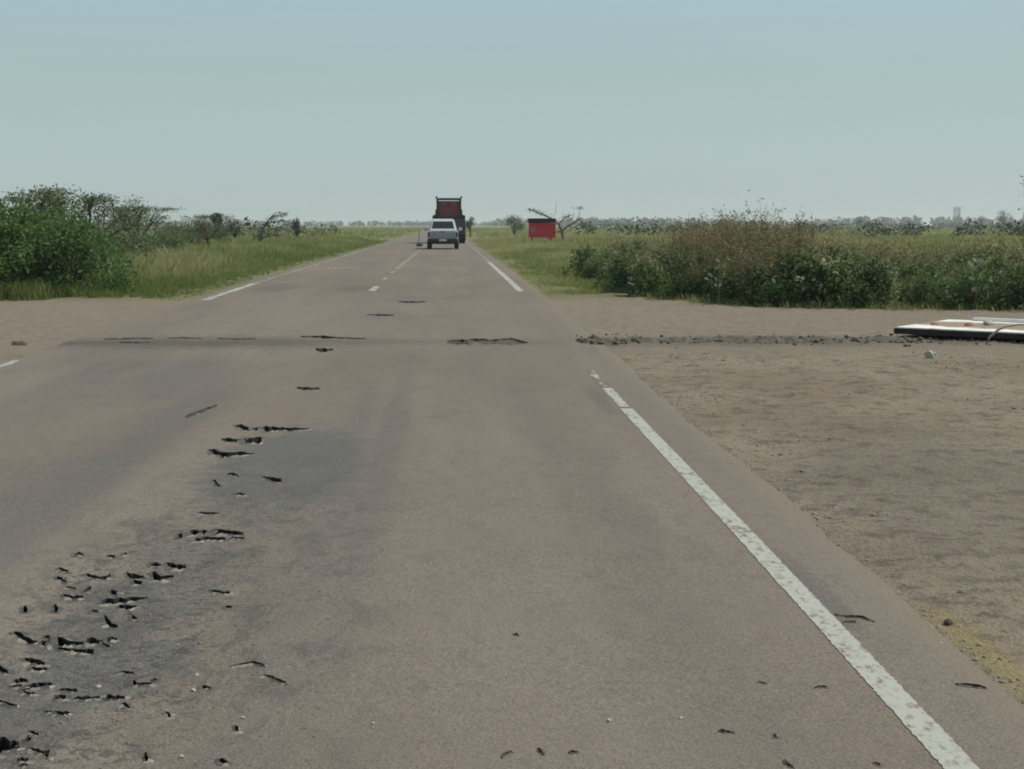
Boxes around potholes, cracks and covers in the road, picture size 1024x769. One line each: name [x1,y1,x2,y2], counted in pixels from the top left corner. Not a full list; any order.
pothole [83,636,122,649]
crack [185,404,312,433]
pothole [220,437,264,445]
pothole [123,572,149,586]
pothole [0,735,27,758]
pothole [146,570,177,583]
pothole [146,562,191,572]
pothole [98,589,152,612]
pothole [14,735,35,747]
pothole [0,663,16,676]
pothole [174,528,247,543]
pothole [18,658,53,674]
